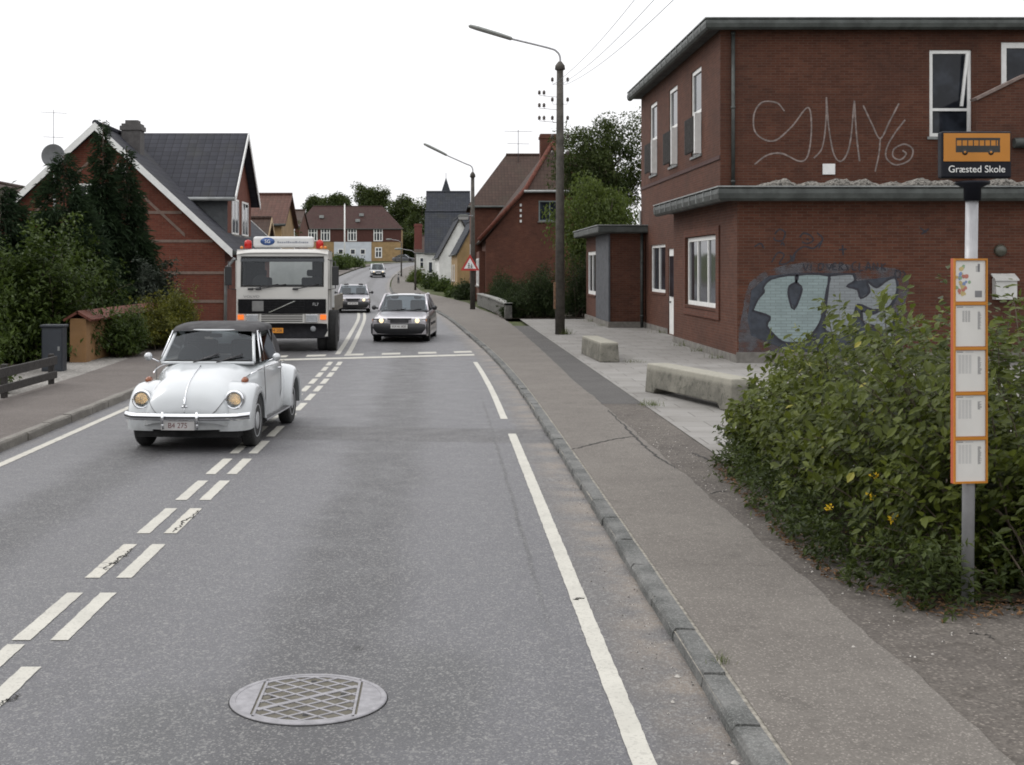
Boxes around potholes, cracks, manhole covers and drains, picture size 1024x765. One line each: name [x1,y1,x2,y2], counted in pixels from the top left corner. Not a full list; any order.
manhole cover [228,674,388,726]
